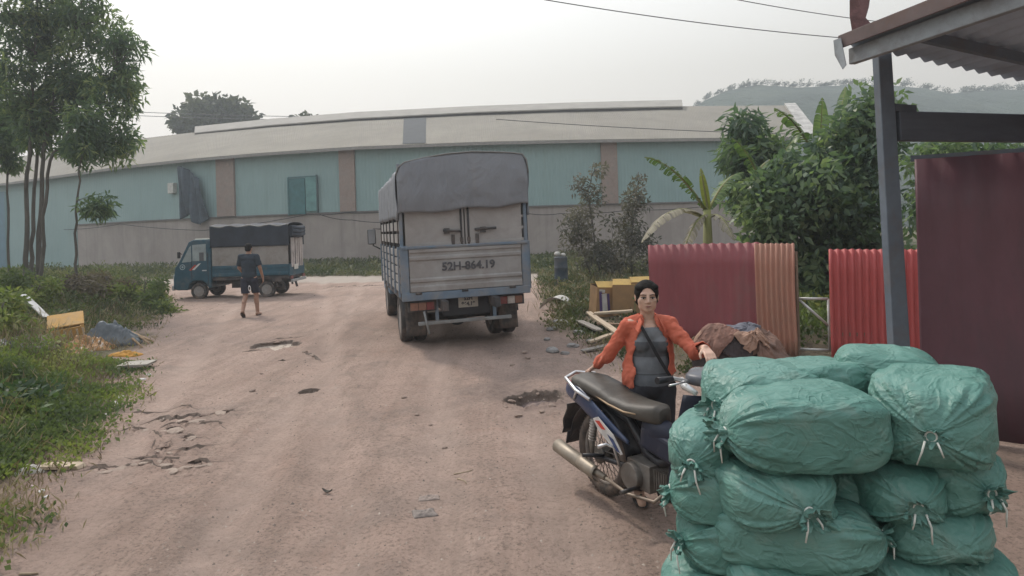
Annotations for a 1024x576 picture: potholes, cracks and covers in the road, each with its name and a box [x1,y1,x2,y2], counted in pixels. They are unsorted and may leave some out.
crack [66,404,258,482]
pothole [234,338,312,355]
pothole [292,387,326,397]
pothole [488,388,573,413]
